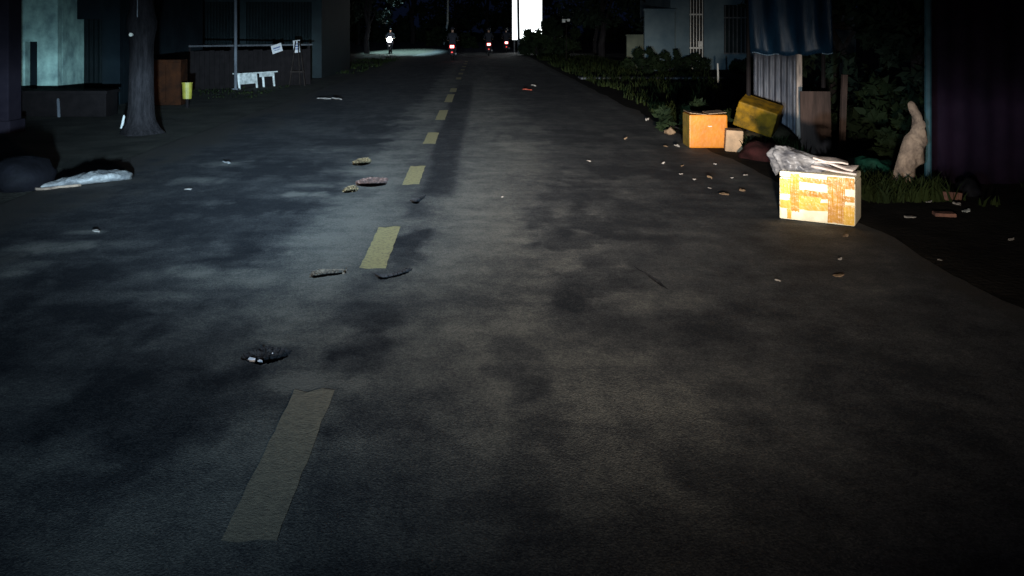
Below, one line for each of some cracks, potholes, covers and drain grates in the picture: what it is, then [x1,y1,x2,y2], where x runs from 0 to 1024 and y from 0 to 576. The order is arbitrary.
crack [634,266,668,289]
pothole [241,346,292,365]
pothole [374,267,413,280]
